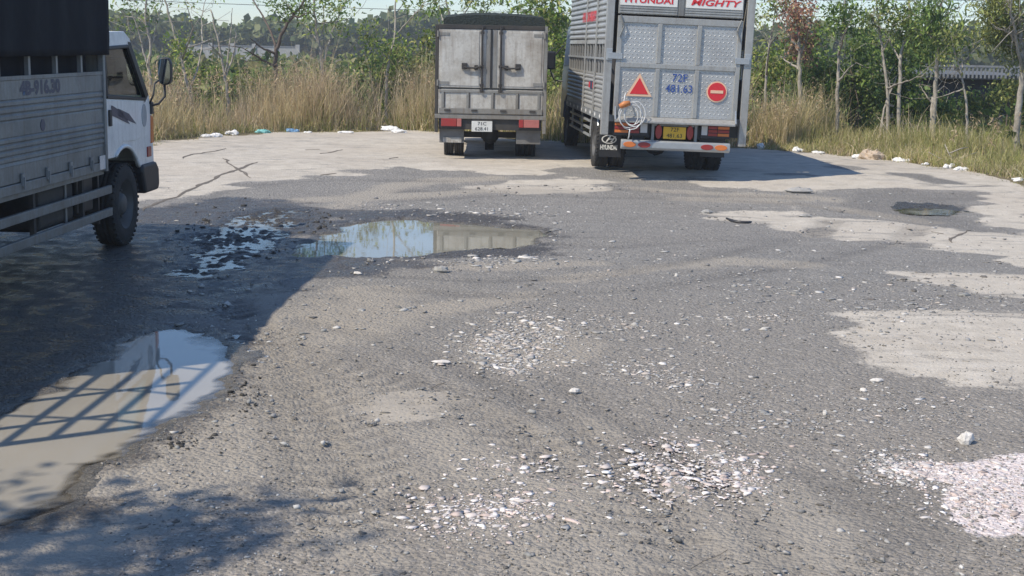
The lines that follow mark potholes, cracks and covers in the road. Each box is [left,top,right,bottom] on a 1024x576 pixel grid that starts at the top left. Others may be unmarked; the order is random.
pothole [0,323,267,529]
crack [931,230,971,242]
pothole [283,216,557,259]
crack [142,148,258,211]
pothole [883,202,969,216]
pothole [148,207,320,281]
